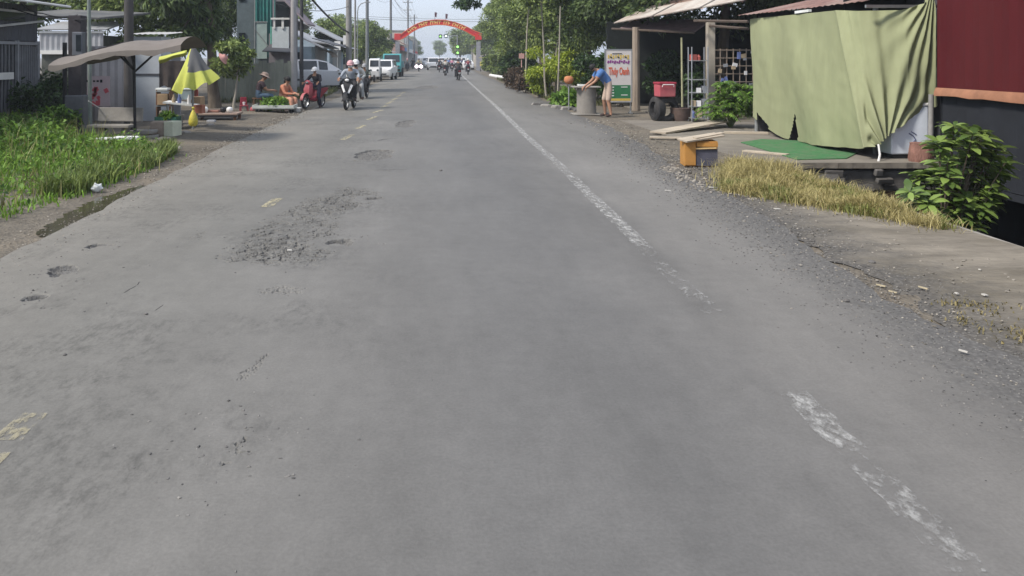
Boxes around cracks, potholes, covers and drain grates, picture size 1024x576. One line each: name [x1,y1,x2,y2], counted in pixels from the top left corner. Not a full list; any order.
pothole [394,120,417,128]
pothole [46,265,80,278]
pothole [325,238,355,246]
pothole [20,294,51,302]
pothole [353,150,395,162]
